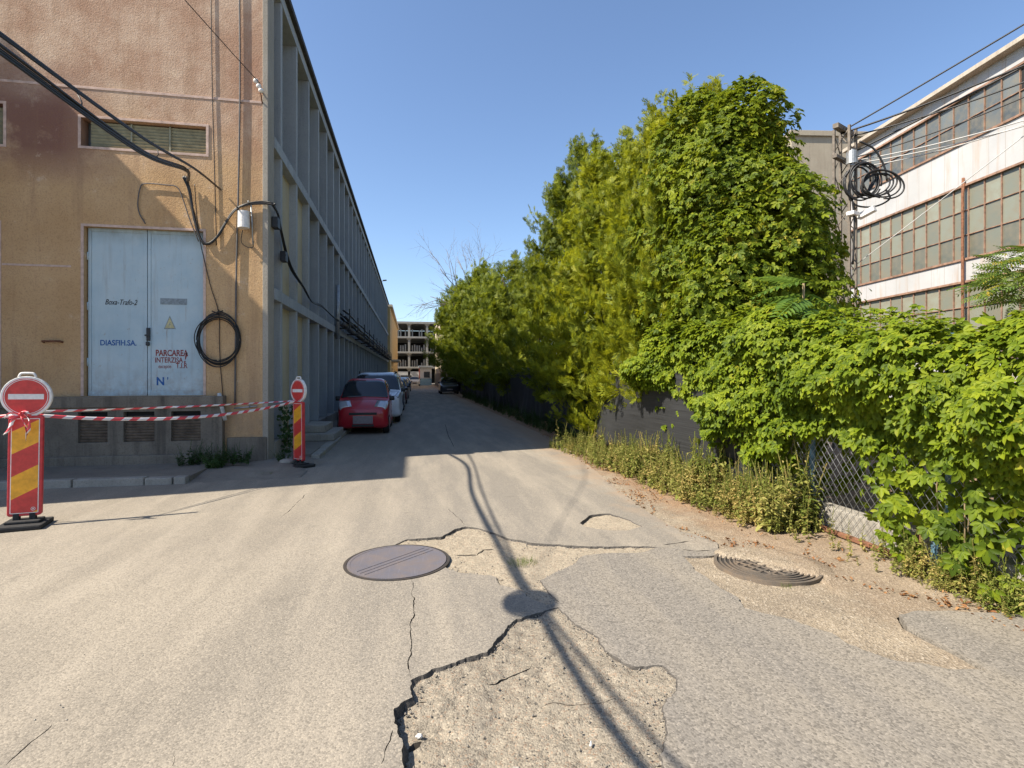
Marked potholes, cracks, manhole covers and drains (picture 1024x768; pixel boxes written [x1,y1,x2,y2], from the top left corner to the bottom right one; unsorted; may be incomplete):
crack [6,725,52,765]
pothole [580,514,641,530]
manhole cover [343,545,450,581]
pothole [395,527,657,605]
crack [407,581,415,676]
pothole [393,607,678,768]
